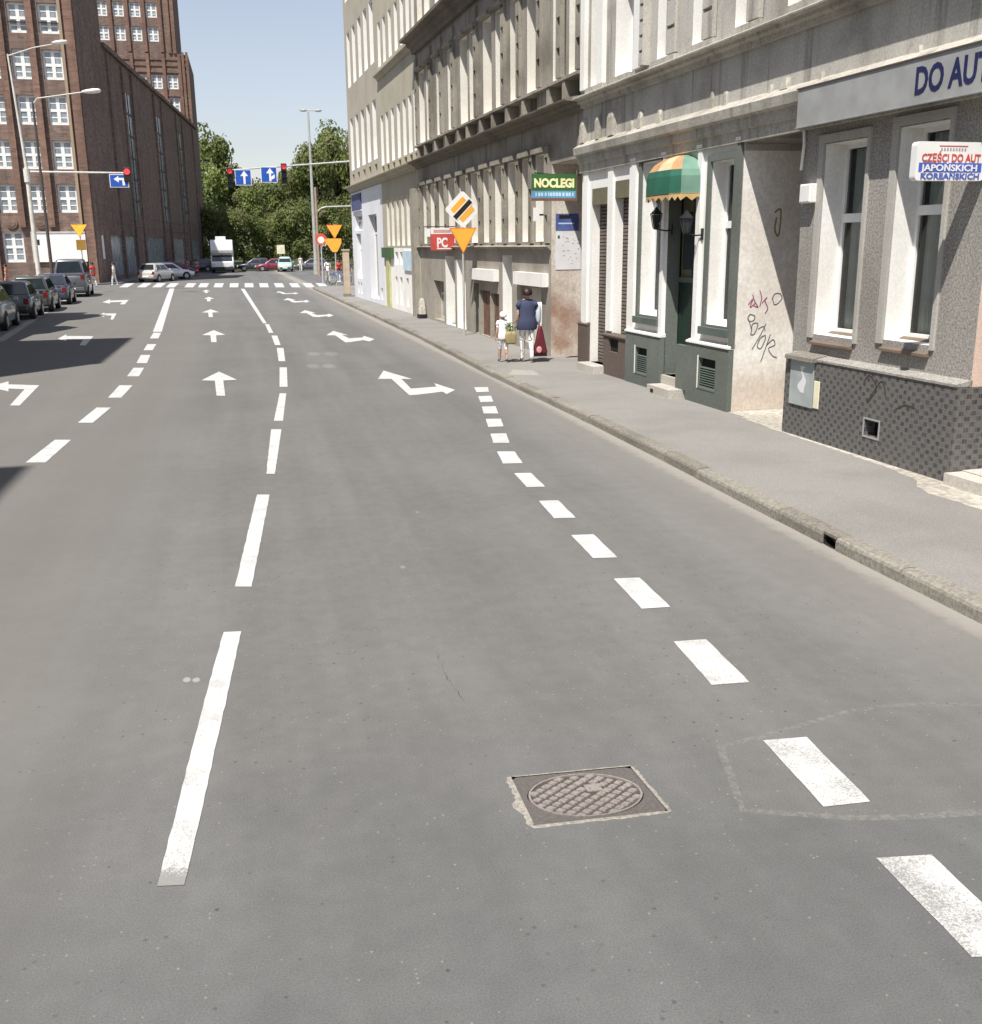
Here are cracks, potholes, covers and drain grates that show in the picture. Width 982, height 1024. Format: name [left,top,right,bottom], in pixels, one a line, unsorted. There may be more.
manhole cover [506,765,671,828]
